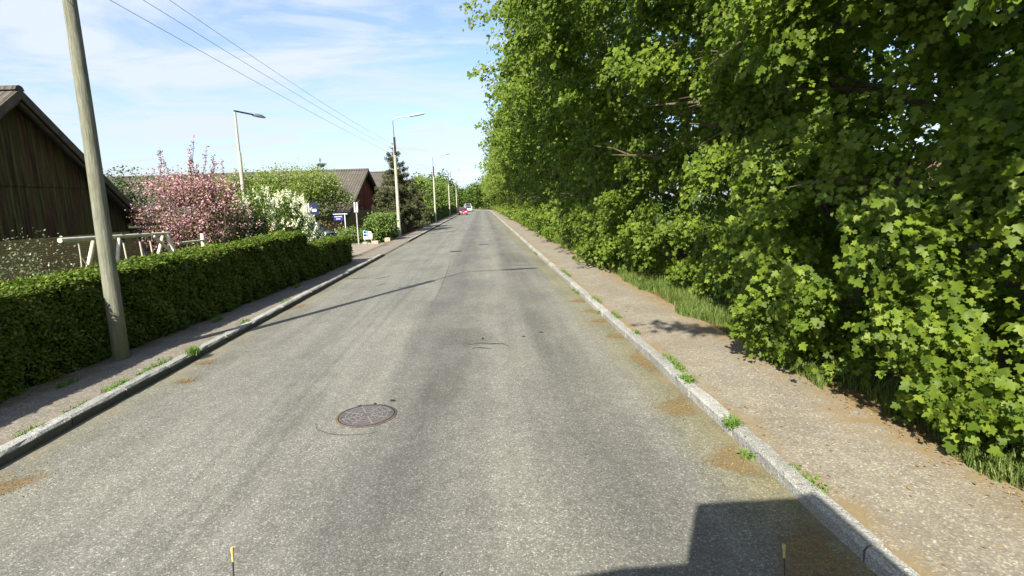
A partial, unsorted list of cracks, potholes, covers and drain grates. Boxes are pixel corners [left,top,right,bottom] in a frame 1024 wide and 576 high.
crack [316,424,377,435]
manhole cover [335,404,397,428]
